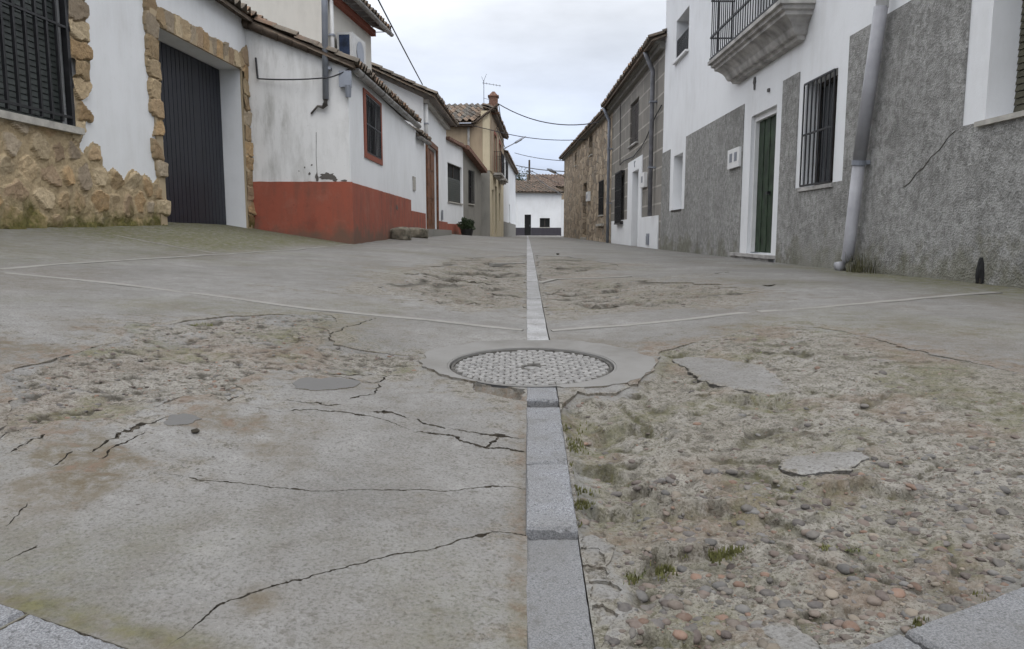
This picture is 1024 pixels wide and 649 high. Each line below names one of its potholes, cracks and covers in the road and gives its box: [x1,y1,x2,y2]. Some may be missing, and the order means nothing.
pothole [0,314,420,435]
crack [175,531,526,641]
manhole cover [420,340,656,389]
crack [90,416,168,458]
crack [162,472,521,492]
crack [1,430,73,466]
crack [256,374,524,452]
pothole [561,326,1024,649]
